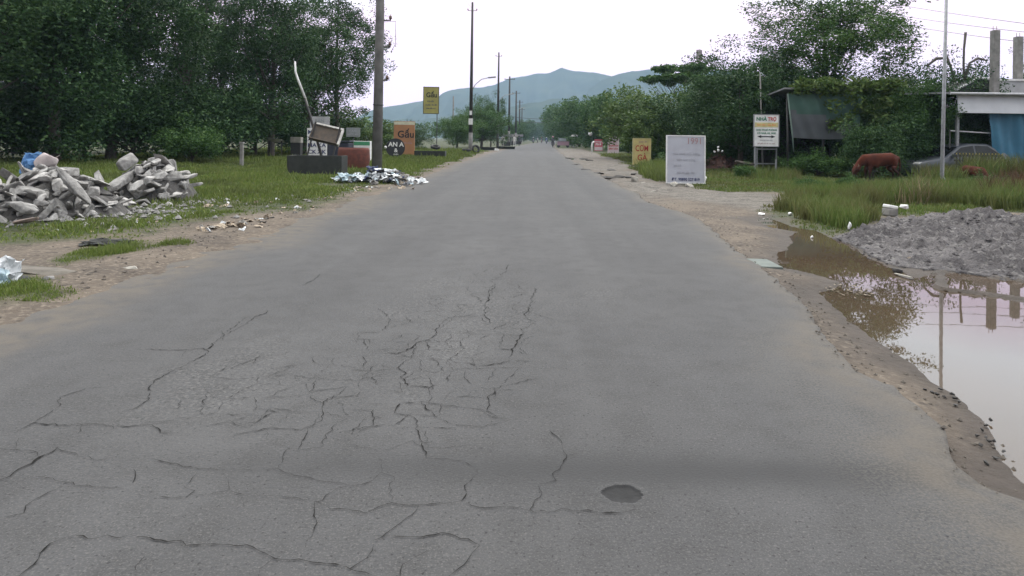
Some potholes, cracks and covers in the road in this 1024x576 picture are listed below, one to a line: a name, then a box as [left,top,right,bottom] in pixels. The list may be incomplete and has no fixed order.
crack [19,444,639,576]
pothole [594,482,651,507]
crack [530,431,567,512]
crack [1,269,554,518]
